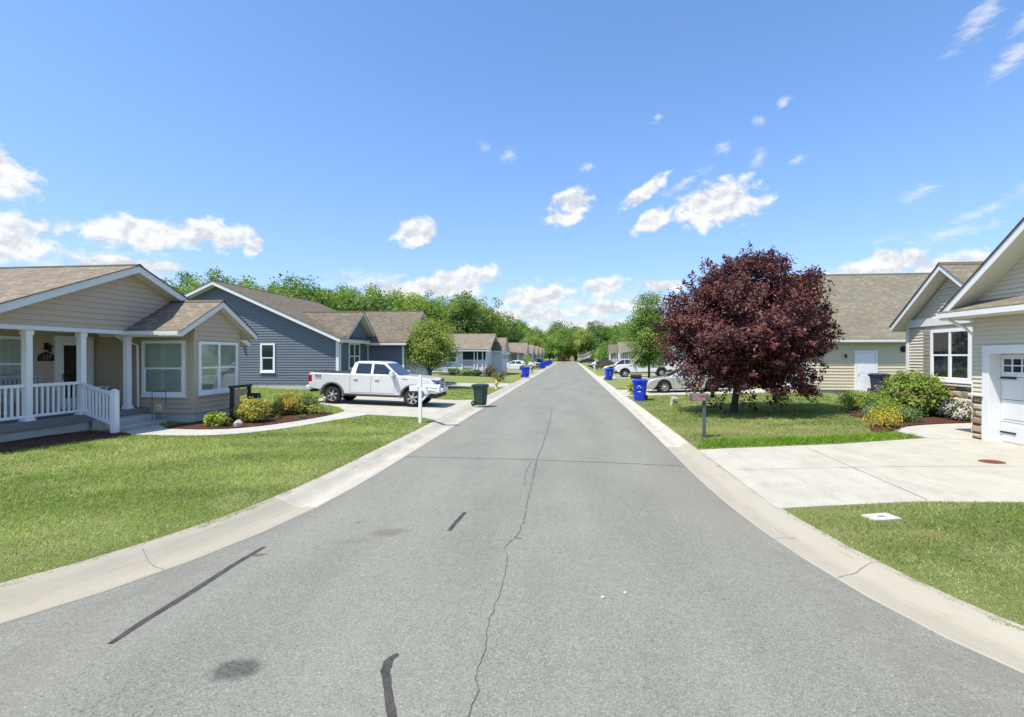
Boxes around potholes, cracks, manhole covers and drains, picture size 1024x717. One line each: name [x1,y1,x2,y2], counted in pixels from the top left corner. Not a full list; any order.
crack [451,410,676,717]
utility cover [860,513,902,522]
